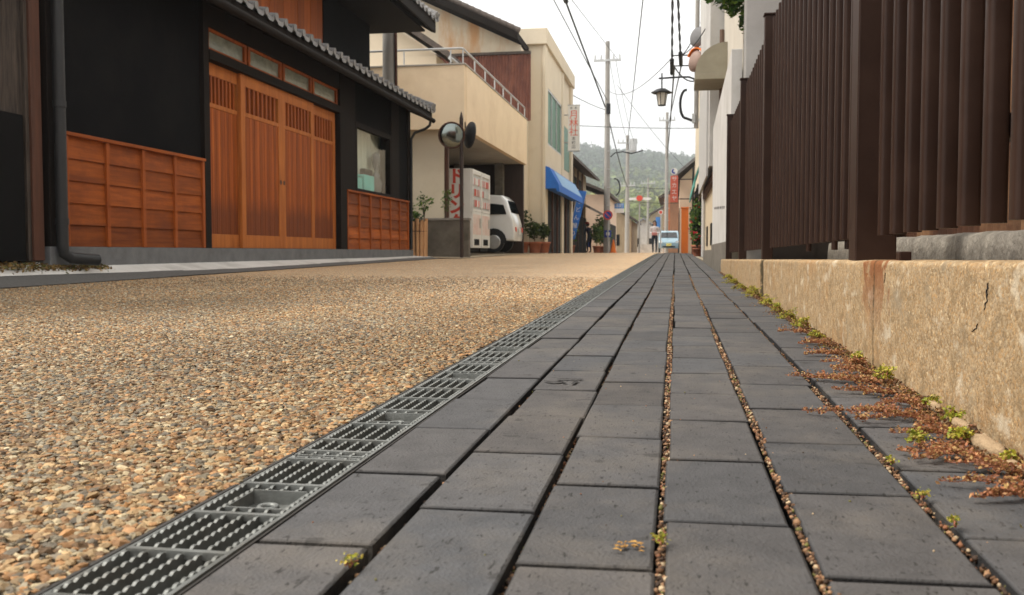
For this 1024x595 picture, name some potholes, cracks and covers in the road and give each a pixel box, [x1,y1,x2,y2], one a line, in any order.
drain grate [560,295,600,307]
drain grate [524,307,583,327]
drain grate [294,363,503,459]
drain grate [41,455,369,595]
drain grate [582,286,612,295]
drain grate [459,327,555,364]
